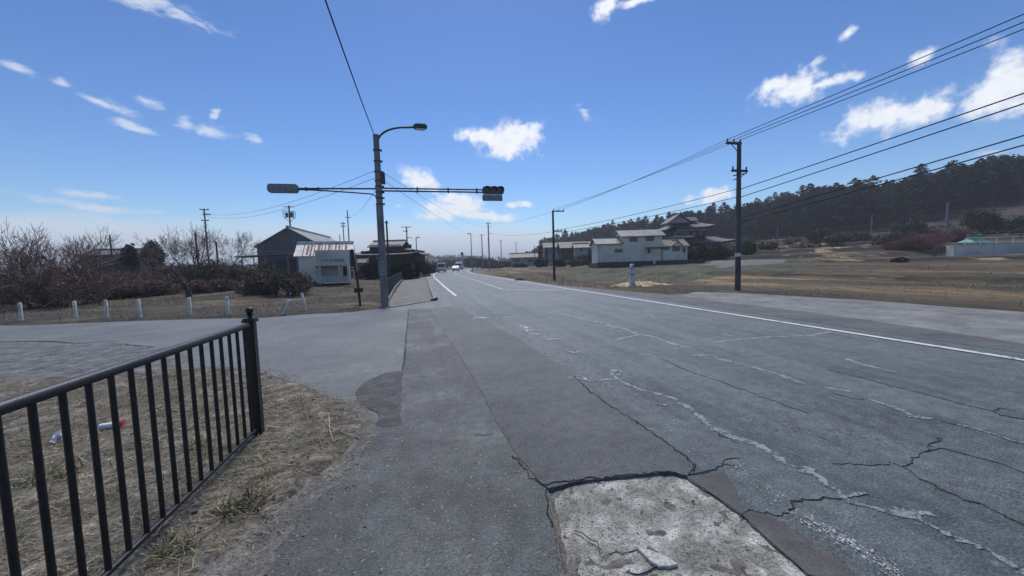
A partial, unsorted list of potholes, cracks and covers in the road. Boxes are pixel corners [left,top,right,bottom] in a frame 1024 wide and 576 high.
crack [826,369,1024,419]
crack [668,361,808,413]
crack [512,455,734,526]
crack [832,438,1024,525]
crack [739,496,842,518]
